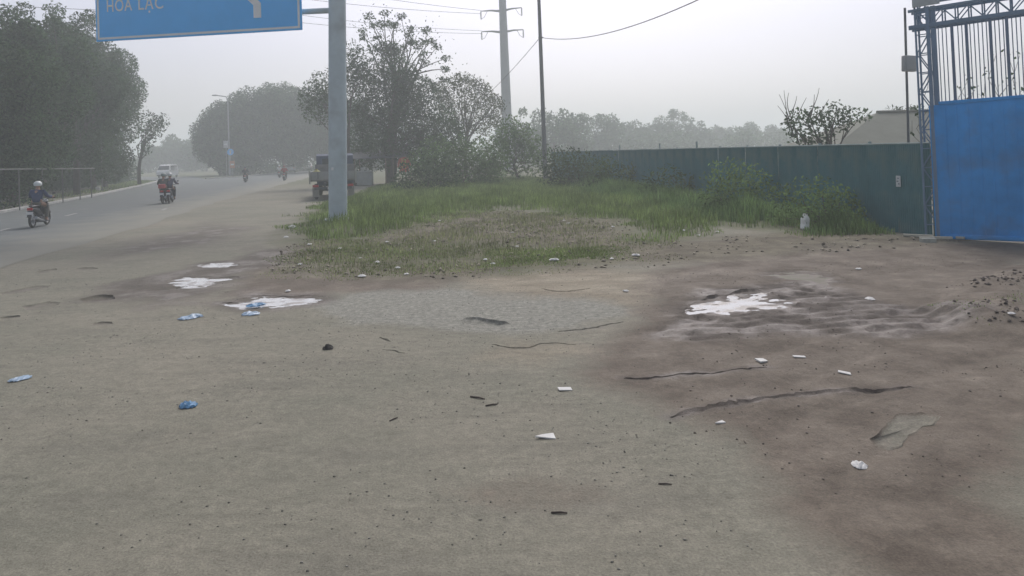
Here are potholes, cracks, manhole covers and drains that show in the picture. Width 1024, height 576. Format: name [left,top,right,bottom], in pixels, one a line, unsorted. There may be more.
pothole [79,294,115,302]
crack [492,322,621,349]
pothole [461,317,509,327]
crack [625,367,914,418]
